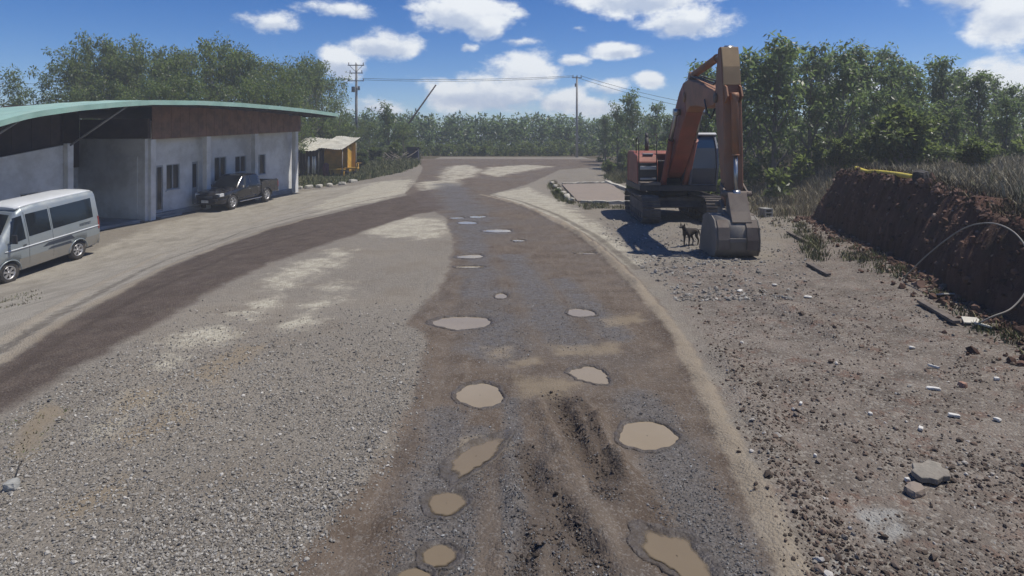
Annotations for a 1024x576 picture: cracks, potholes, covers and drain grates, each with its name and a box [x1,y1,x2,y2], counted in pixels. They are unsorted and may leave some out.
pothole [426,315,496,331]
pothole [451,380,509,410]
pothole [564,364,613,386]
pothole [614,418,686,453]
pothole [388,561,439,576]
pothole [415,539,465,573]
pothole [438,429,514,487]
pothole [420,486,476,521]
pothole [626,519,724,576]
pothole [564,307,599,318]
